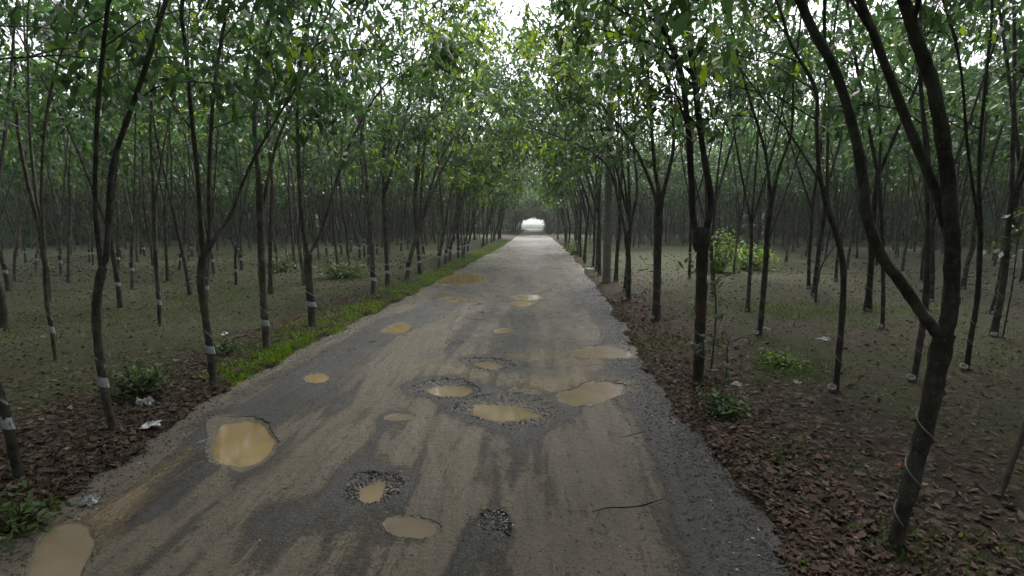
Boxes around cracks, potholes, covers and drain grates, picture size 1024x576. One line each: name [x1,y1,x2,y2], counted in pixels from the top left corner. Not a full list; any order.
pothole [384,412,417,421]
pothole [406,376,486,399]
crack [591,498,666,517]
pothole [303,372,333,384]
pothole [435,272,490,285]
pothole [377,514,443,539]
pothole [336,464,418,508]
pothole [475,507,515,543]
pothole [569,346,637,359]
pothole [555,380,628,406]
pothole [449,355,518,374]
pothole [434,387,568,436]
